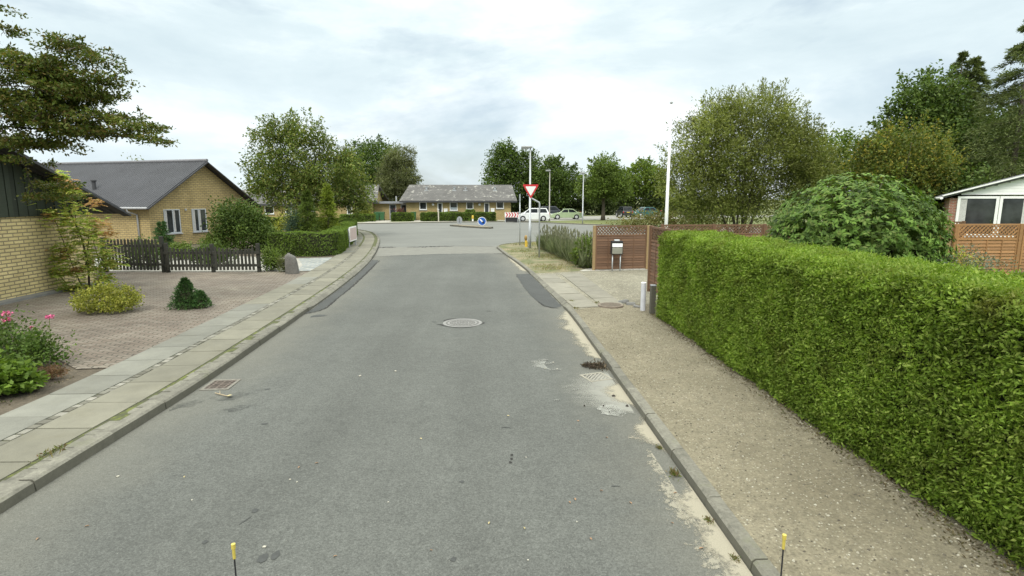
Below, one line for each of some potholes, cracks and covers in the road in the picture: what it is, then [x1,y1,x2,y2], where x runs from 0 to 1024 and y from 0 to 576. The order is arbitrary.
drain grate [199,379,241,391]
manhole cover [443,319,482,327]
drain grate [580,372,613,382]
